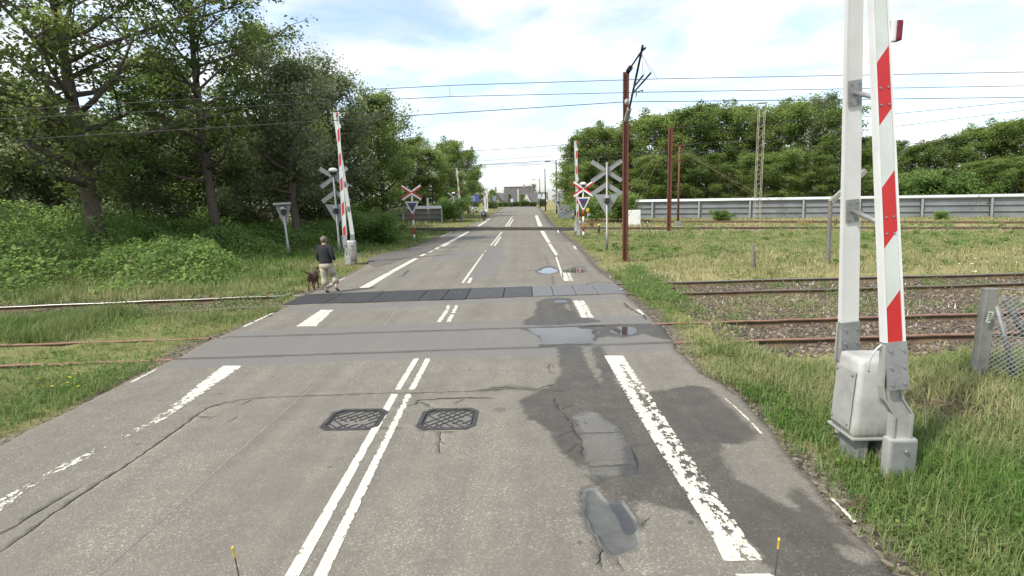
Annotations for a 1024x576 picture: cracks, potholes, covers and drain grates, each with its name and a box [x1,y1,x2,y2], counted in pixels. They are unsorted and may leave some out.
manhole cover [416,408,479,430]
pothole [580,487,642,557]
manhole cover [320,408,388,431]
crack [0,385,619,552]
